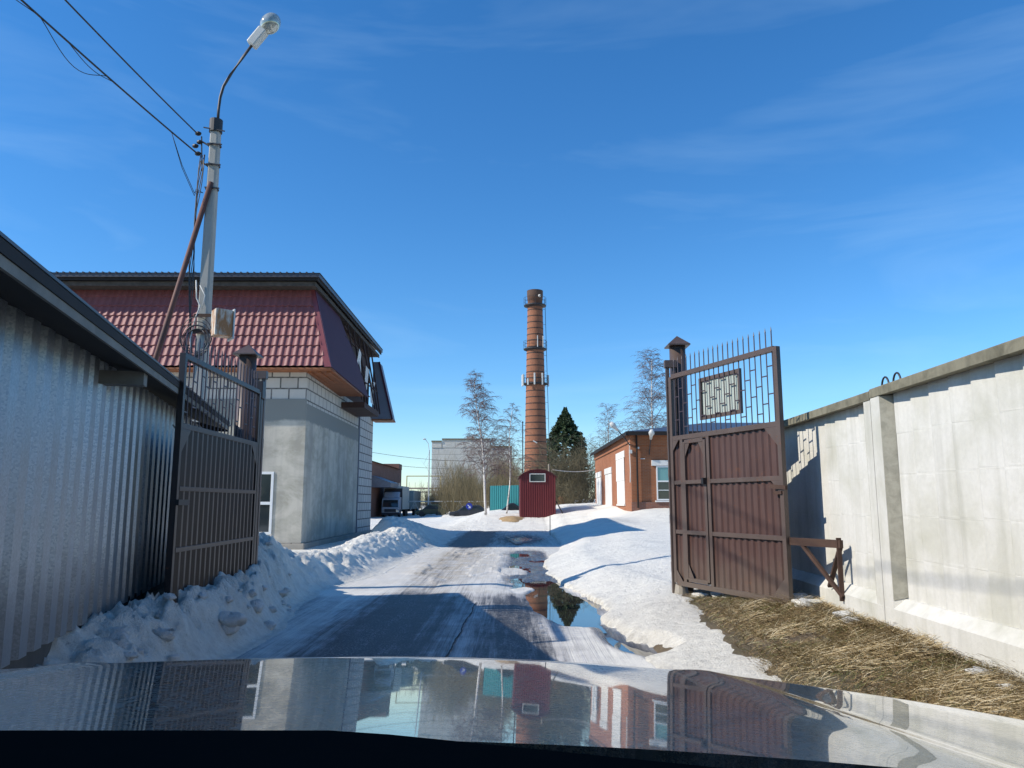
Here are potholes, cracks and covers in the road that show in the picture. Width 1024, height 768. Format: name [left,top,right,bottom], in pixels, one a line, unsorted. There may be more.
crack [445,603,476,657]
